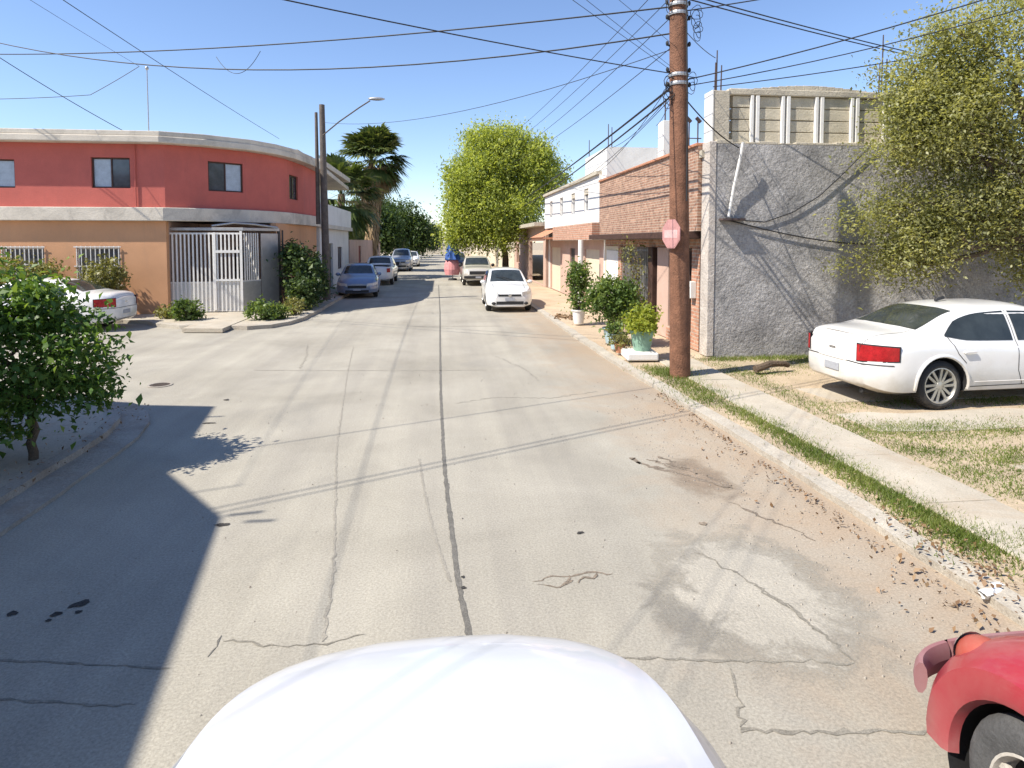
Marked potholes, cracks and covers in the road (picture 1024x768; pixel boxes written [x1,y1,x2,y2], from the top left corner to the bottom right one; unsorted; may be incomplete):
crack [629,456,816,541]
crack [694,552,855,661]
crack [730,668,747,727]
crack [208,634,362,656]
crack [533,571,610,588]
